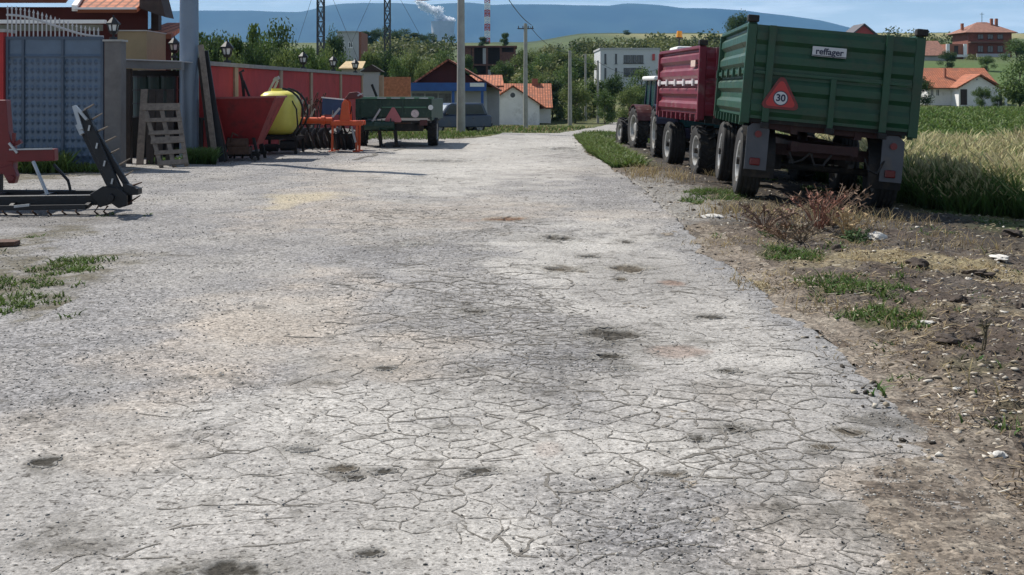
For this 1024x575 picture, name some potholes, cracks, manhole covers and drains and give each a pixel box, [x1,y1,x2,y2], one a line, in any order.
pothole [605,264,660,274]
pothole [26,455,63,470]
crack [51,179,982,575]
pothole [352,548,387,558]
pothole [368,467,399,476]
pothole [540,264,589,273]
pothole [323,464,360,474]
pothole [458,466,501,477]
pothole [341,473,367,482]
pothole [573,325,650,342]
pothole [828,426,868,438]
pothole [537,234,576,242]
